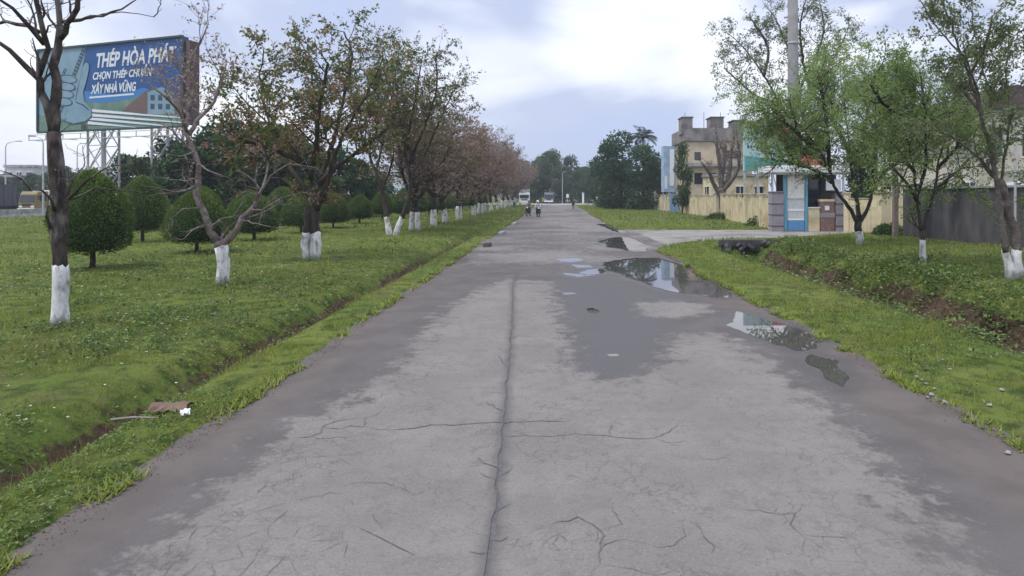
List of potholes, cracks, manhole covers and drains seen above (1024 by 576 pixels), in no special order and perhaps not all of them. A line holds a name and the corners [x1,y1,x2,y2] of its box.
crack [549,510,715,576]
crack [736,502,825,550]
crack [163,503,353,576]
crack [257,272,684,576]
